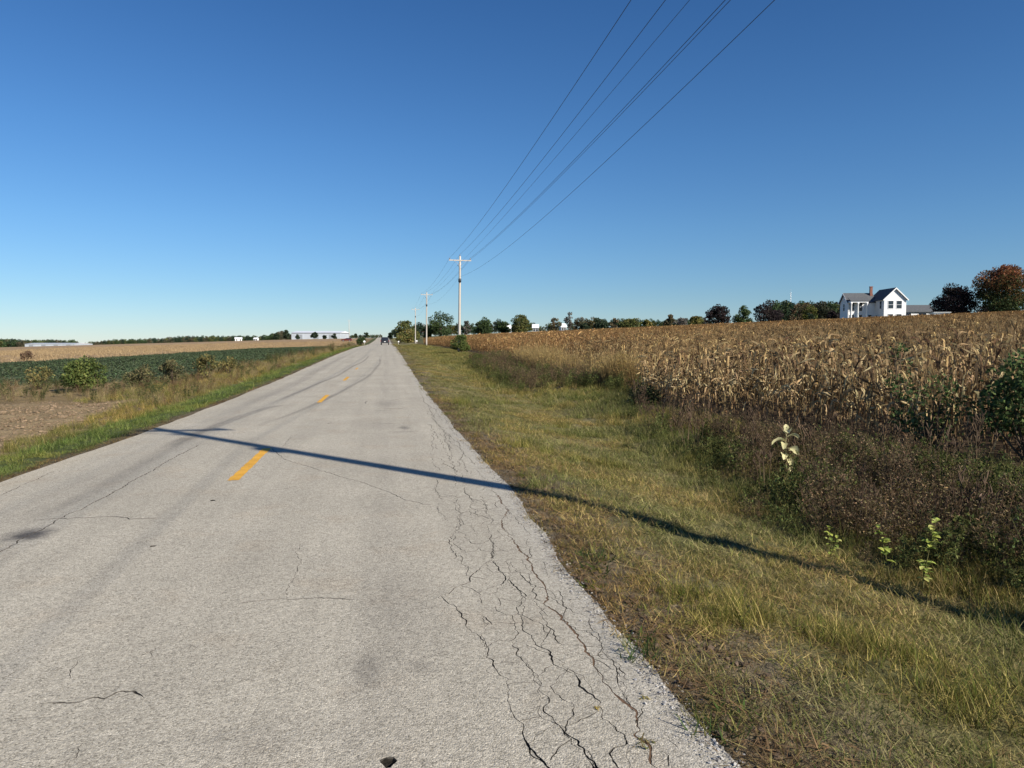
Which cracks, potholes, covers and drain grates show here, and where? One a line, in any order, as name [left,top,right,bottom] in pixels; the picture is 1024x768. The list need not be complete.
crack [0,446,197,552]
crack [52,660,144,704]
crack [237,547,354,604]
crack [421,395,679,768]
